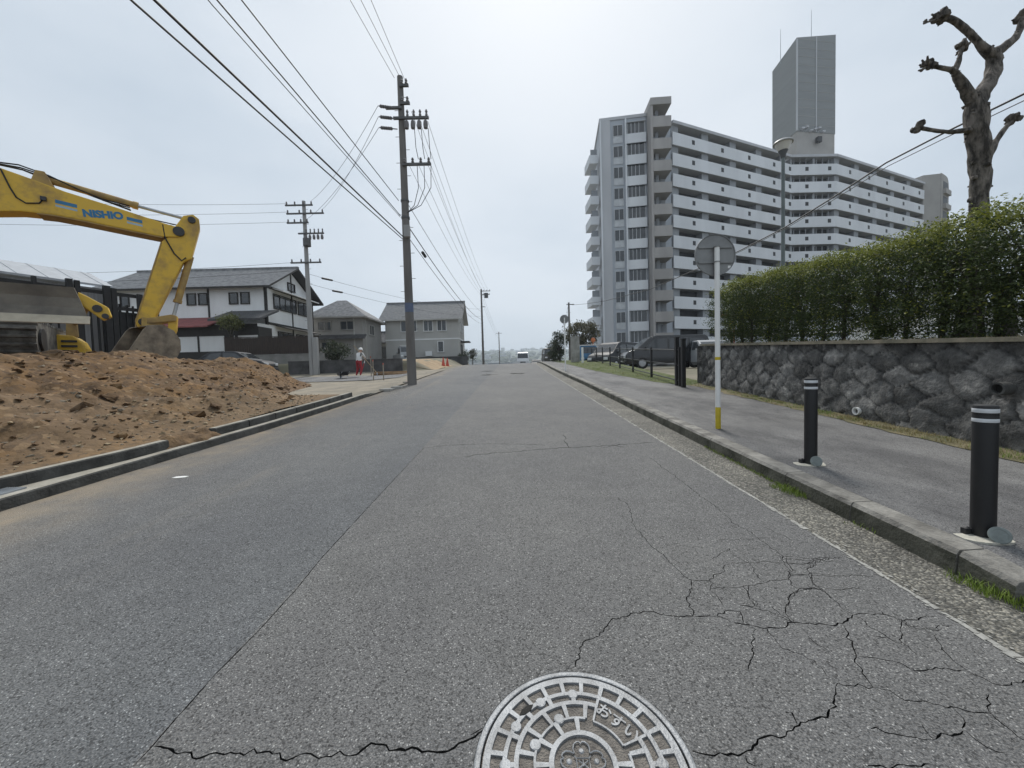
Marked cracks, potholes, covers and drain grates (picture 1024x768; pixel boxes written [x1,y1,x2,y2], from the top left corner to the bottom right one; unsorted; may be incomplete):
crack [575,458,1024,768]
crack [139,437,651,762]
manhole cover [473,672,697,768]
